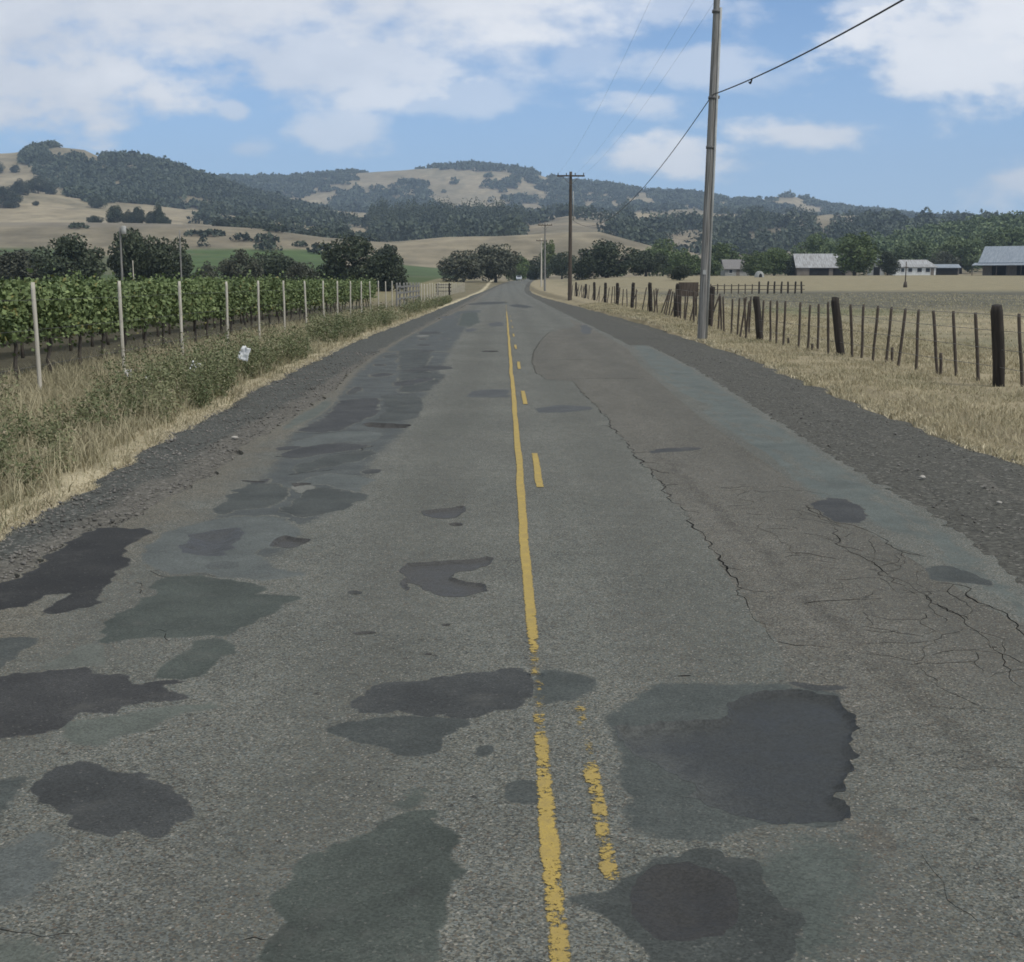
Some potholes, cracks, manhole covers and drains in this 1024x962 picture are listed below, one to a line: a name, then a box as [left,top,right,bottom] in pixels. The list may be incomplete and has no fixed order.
crack [576,385,822,647]
crack [723,486,1024,709]
